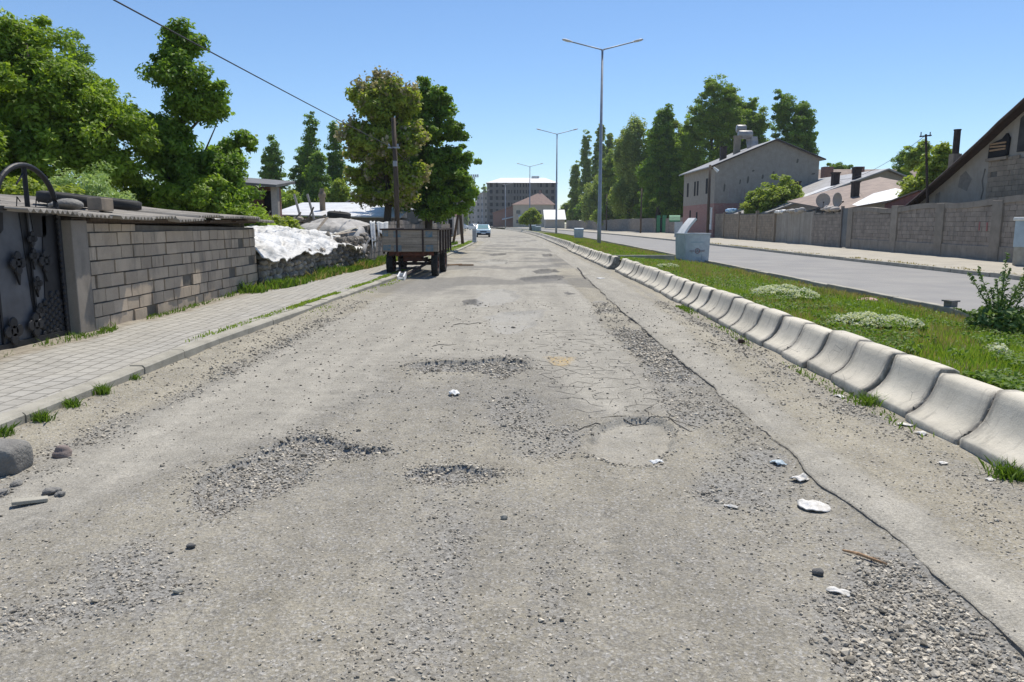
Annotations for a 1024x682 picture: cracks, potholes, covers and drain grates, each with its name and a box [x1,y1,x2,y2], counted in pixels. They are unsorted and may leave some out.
pothole [401,464,507,488]
pothole [405,356,530,380]
pothole [186,433,395,520]
crack [577,268,1024,657]
crack [522,330,658,415]
